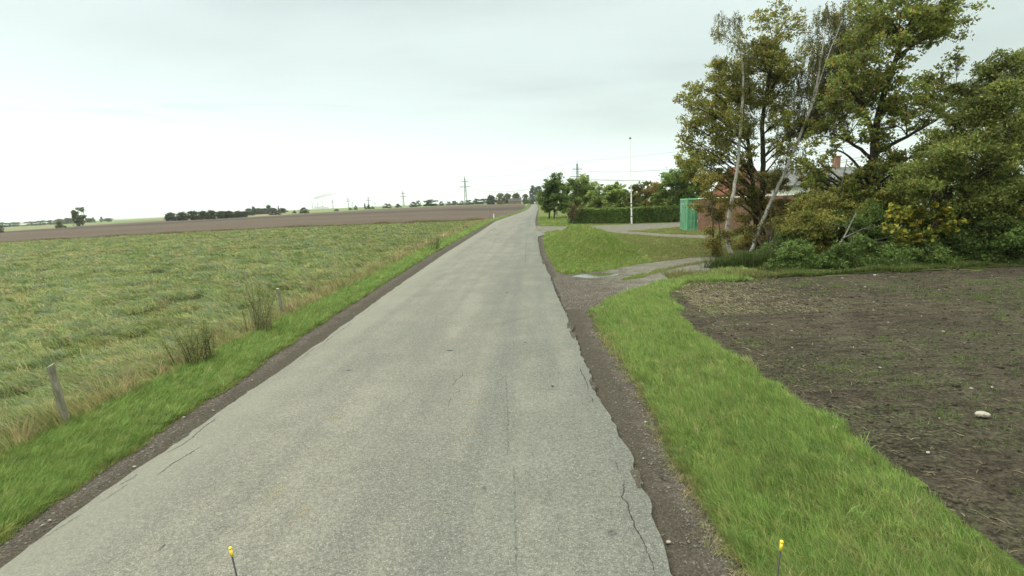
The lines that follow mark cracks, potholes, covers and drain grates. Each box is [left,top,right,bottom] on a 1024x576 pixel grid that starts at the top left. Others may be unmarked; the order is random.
crack [597,462,654,569]
